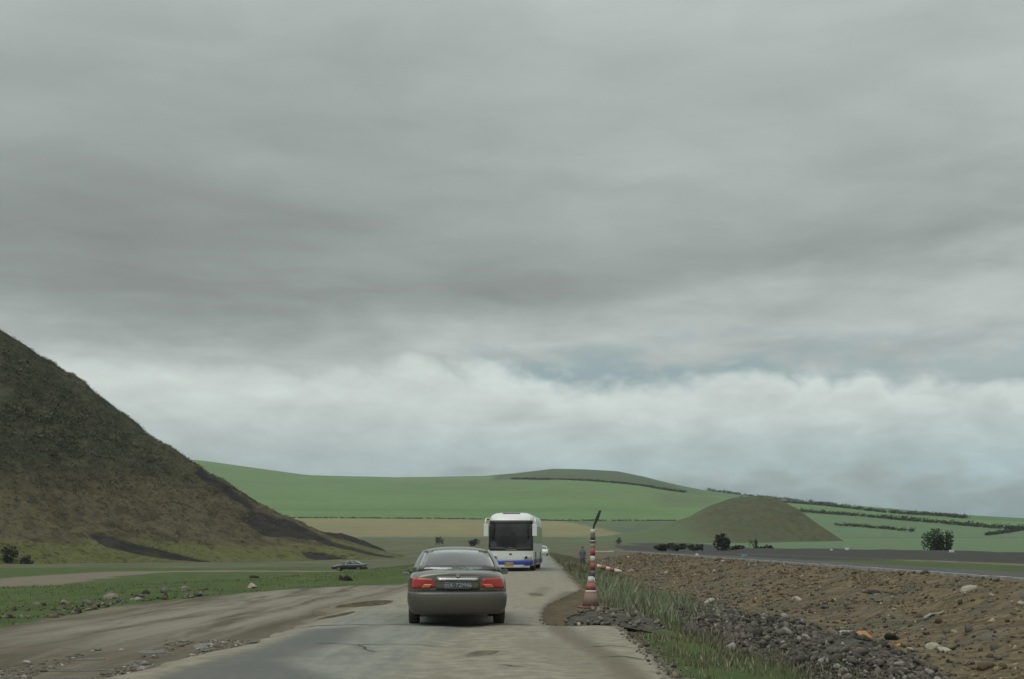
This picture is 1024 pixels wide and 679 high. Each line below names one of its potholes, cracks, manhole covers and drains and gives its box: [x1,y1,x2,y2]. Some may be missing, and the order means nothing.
pothole [336,600,393,608]
crack [310,624,520,652]
